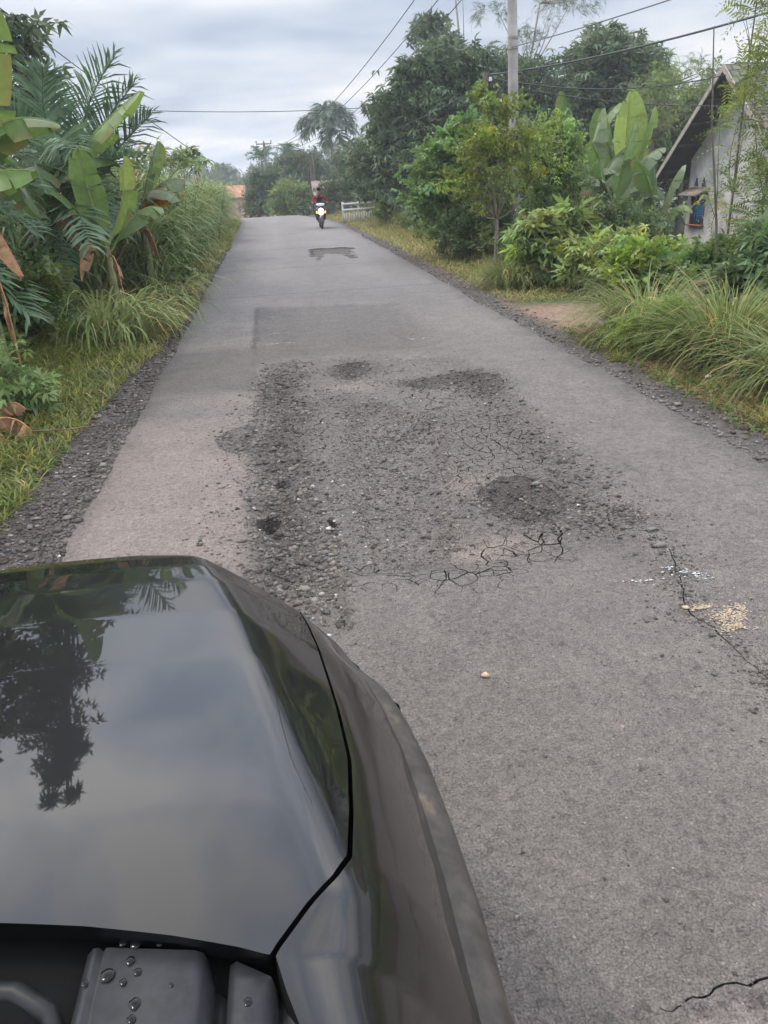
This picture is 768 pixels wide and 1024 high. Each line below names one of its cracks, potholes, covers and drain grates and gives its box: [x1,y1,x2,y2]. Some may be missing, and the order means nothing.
pothole [333,362,370,380]
pothole [476,475,567,526]
pothole [256,516,282,535]
crack [662,977,768,1012]
crack [297,527,591,594]
pothole [403,370,504,391]
crack [671,553,768,679]
pothole [341,403,458,566]
pothole [307,247,359,260]
crack [383,391,552,487]
